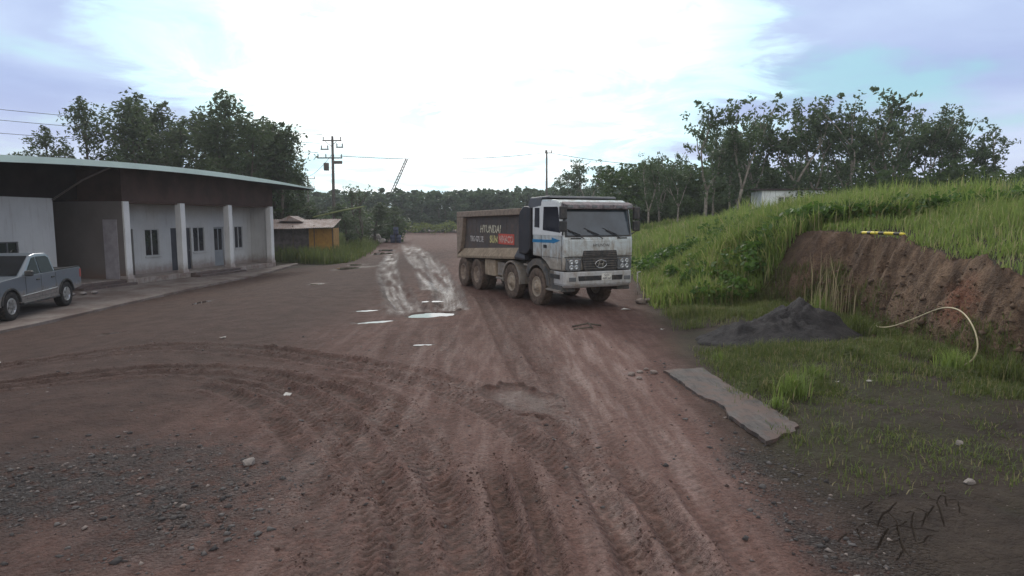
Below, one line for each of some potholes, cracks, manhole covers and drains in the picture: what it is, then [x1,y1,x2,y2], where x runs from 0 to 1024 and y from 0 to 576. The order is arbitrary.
pothole [473,380,572,420]
crack [837,482,967,561]
